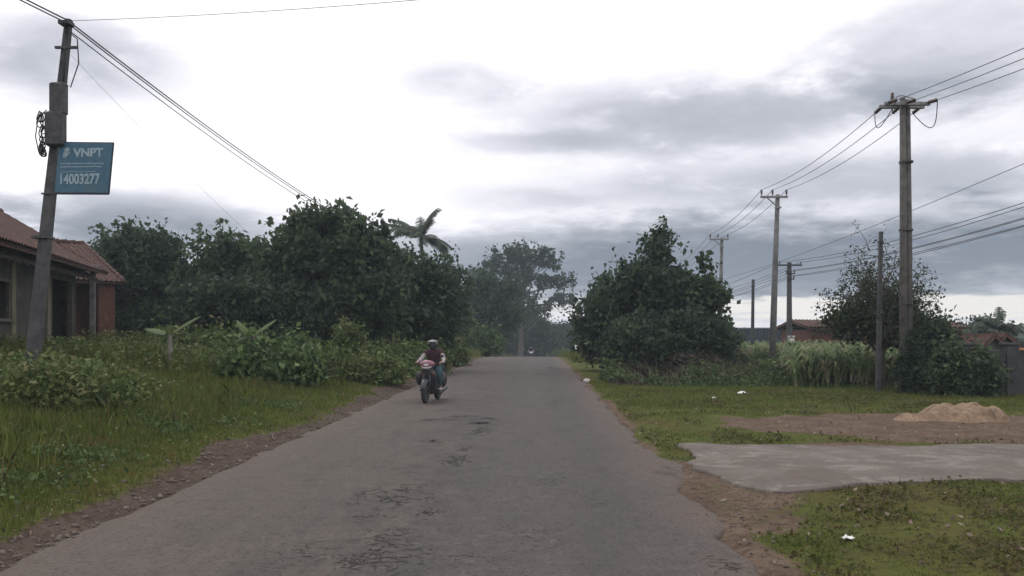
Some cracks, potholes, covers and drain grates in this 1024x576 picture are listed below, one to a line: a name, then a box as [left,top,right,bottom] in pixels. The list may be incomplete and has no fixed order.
crack [256,410,489,576]
